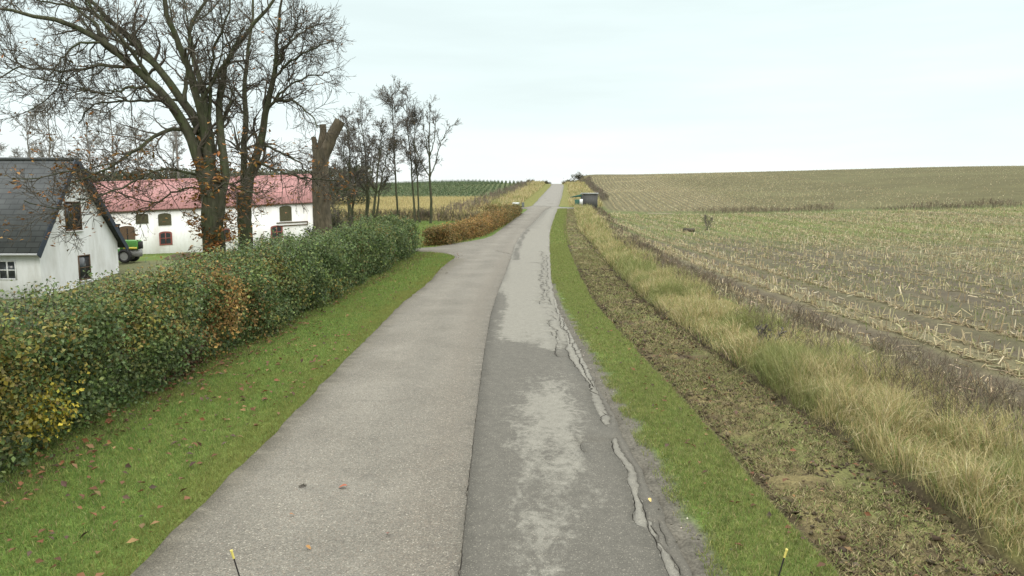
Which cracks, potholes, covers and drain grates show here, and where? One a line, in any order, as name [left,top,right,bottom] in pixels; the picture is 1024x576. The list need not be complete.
crack [537,253,596,394]
crack [600,413,681,576]
